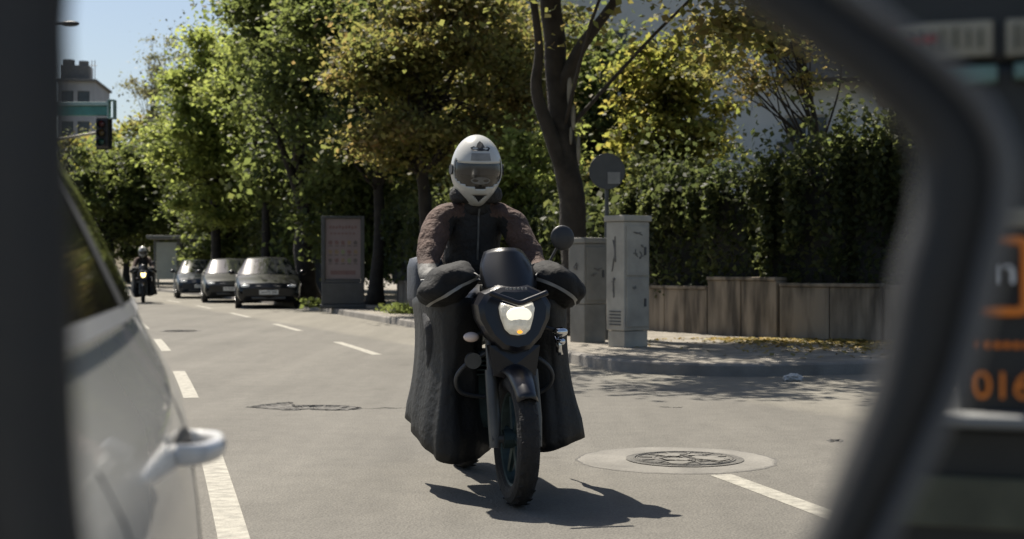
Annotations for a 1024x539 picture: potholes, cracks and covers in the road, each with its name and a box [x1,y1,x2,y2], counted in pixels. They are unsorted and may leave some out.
manhole cover [575,447,778,474]
